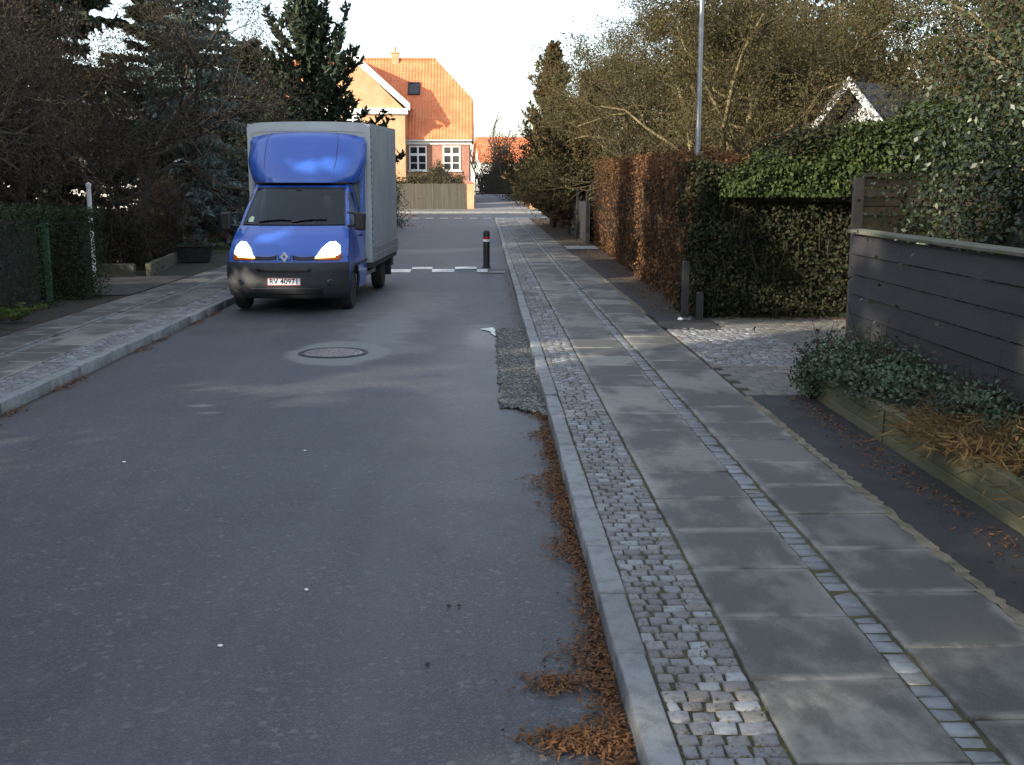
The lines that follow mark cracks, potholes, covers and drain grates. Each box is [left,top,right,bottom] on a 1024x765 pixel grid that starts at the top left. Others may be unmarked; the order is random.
manhole cover [298,347,369,358]
